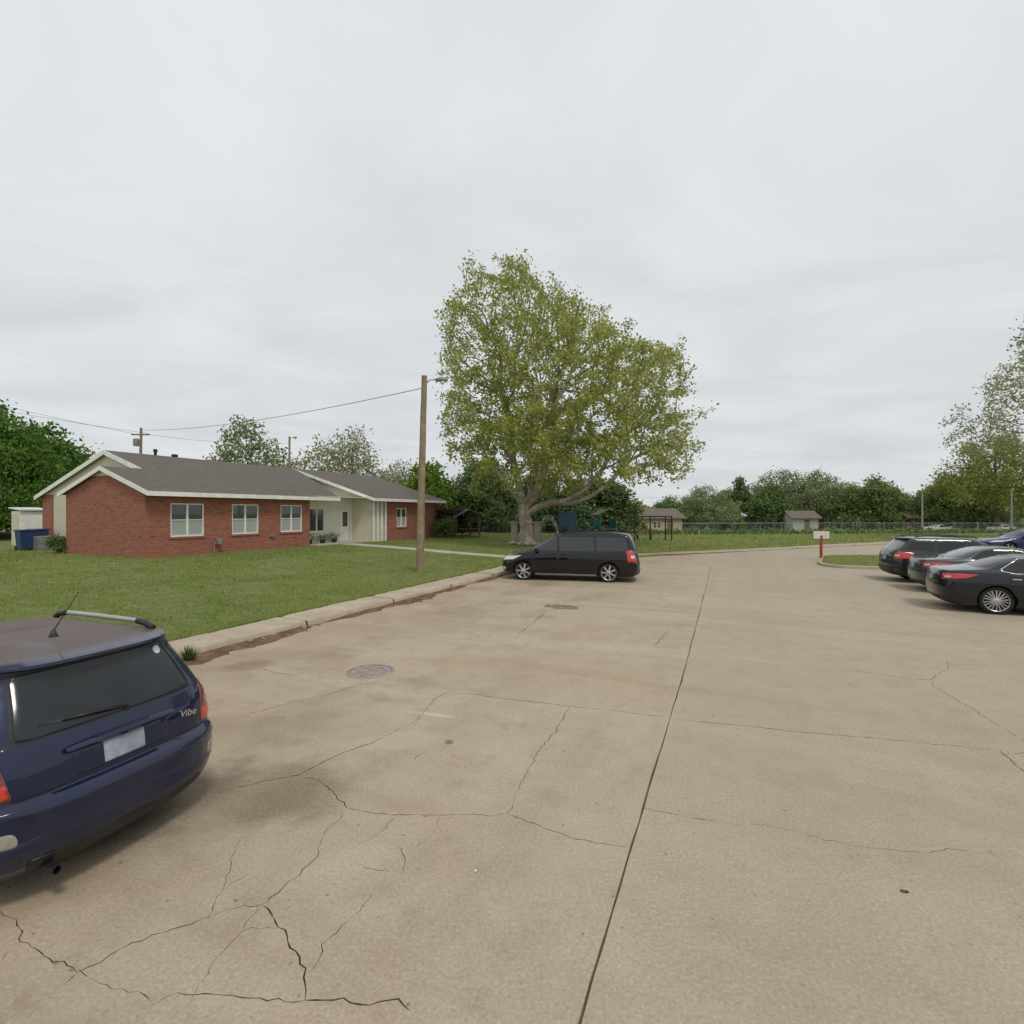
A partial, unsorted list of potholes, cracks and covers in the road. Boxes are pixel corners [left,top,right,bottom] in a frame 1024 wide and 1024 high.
crack [642,808,1011,857]
crack [747,661,1024,771]
crack [0,812,409,1010]
crack [215,692,654,871]
manhole cover [345,664,395,679]
crack [674,718,994,751]
